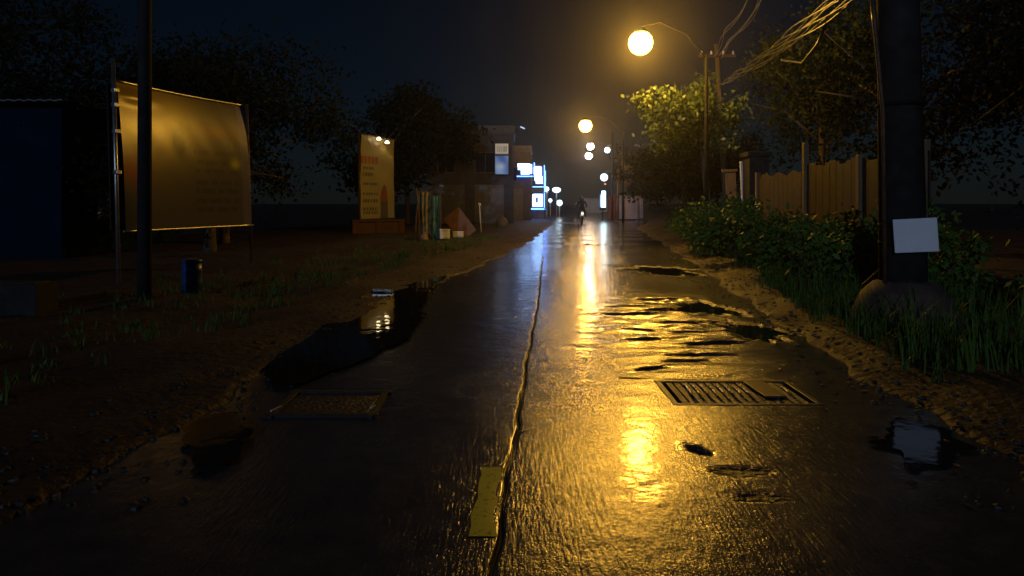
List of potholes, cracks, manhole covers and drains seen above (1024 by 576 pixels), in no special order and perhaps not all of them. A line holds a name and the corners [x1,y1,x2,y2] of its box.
pothole [732,491,792,503]
pothole [685,444,713,456]
pothole [666,299,755,318]
manhole cover [262,389,393,419]
pothole [714,321,802,344]
pothole [616,265,707,277]
pothole [706,466,779,478]
drain grate [654,380,825,406]
